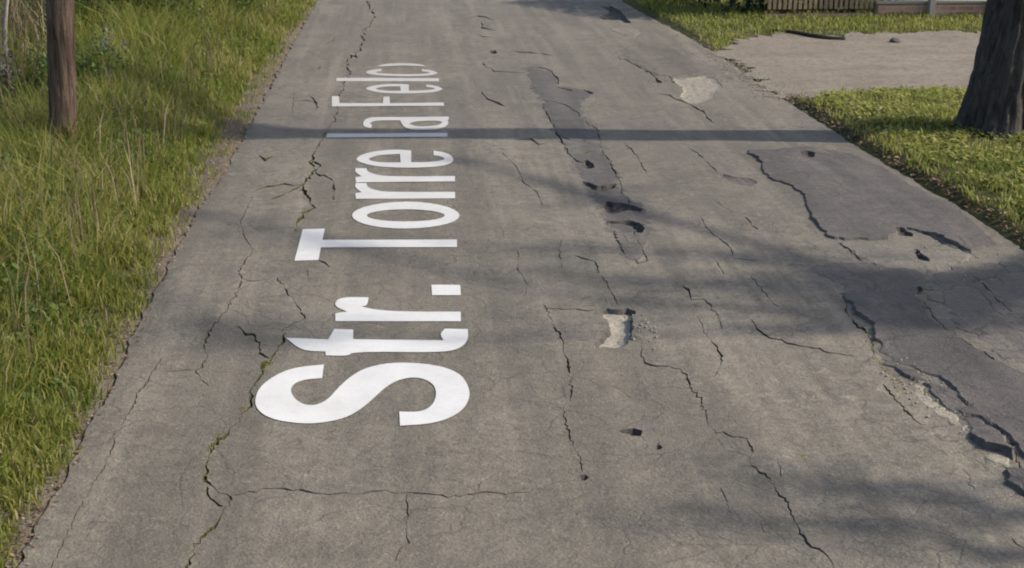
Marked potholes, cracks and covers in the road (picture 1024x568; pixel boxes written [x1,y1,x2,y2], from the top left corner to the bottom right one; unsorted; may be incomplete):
crack [924,303,995,360]
crack [921,230,979,259]
pothole [594,308,636,348]
